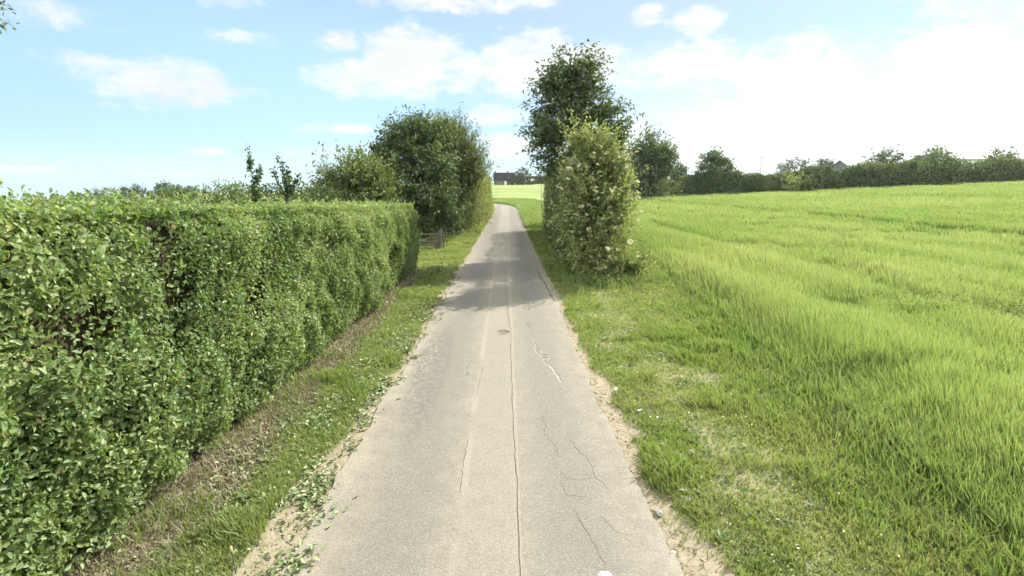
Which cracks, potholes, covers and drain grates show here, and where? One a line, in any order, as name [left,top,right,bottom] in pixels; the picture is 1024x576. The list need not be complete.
crack [460,437,469,491]
crack [542,415,633,566]
crack [521,269,561,382]
